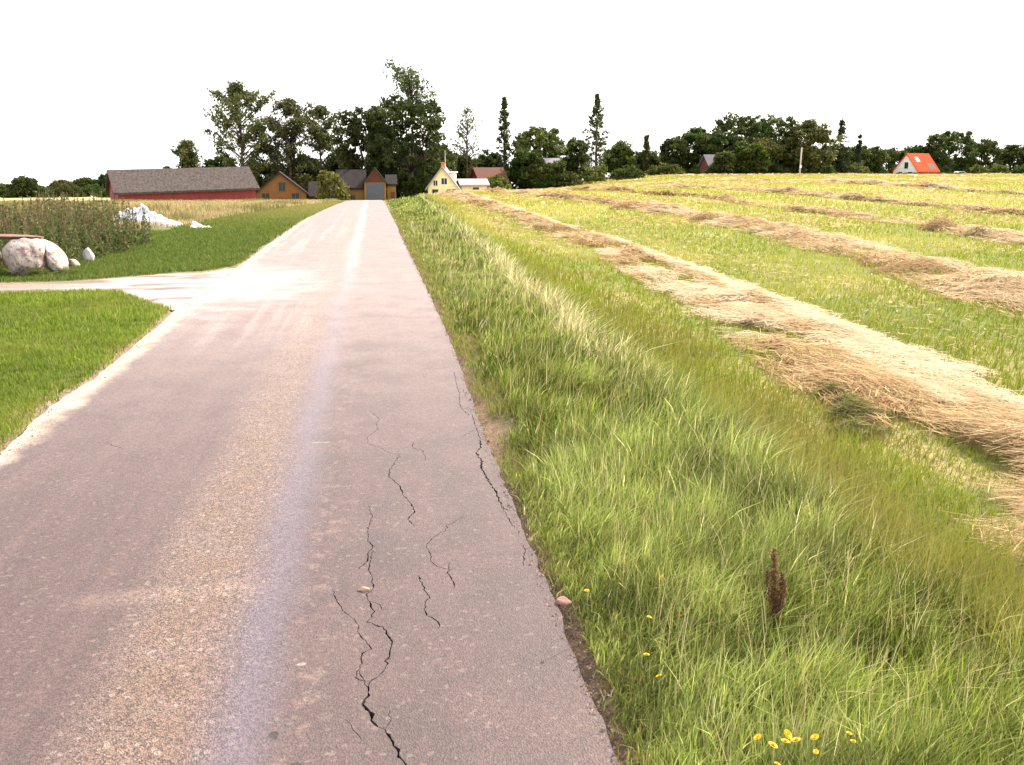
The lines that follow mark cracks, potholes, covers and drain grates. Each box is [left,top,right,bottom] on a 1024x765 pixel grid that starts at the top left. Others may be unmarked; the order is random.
crack [333,505,407,765]
crack [362,412,462,628]
crack [454,374,515,528]
